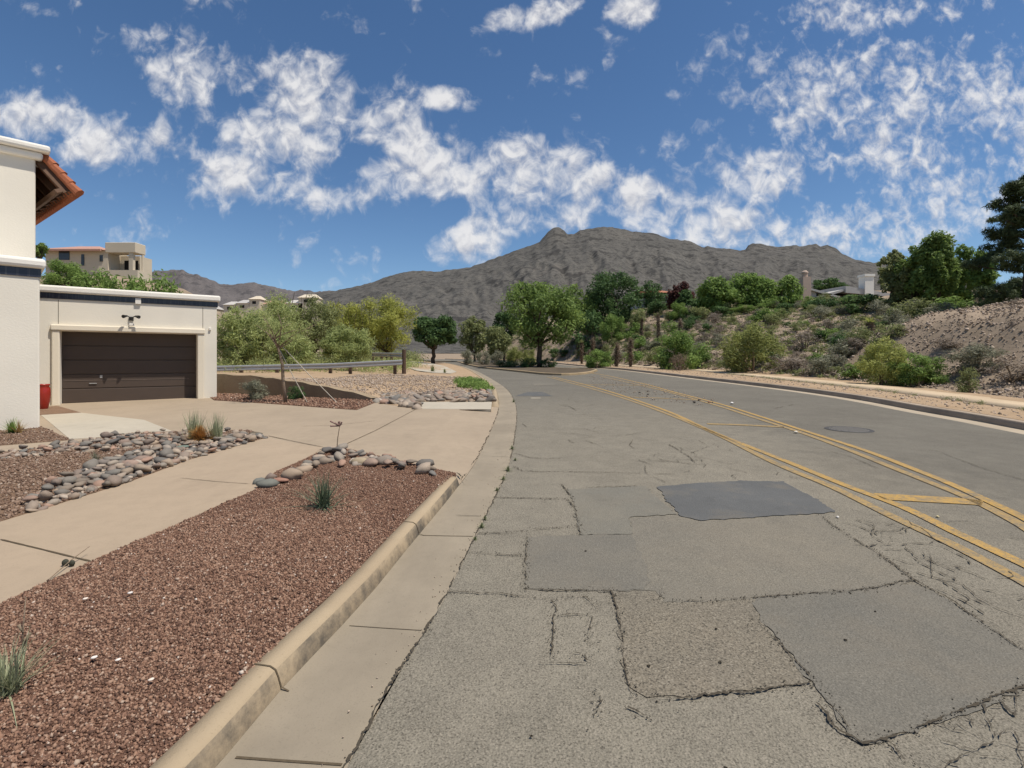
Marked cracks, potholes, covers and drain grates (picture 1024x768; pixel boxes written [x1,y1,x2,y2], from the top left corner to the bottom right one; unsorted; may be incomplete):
crack [342,388,1024,768]
